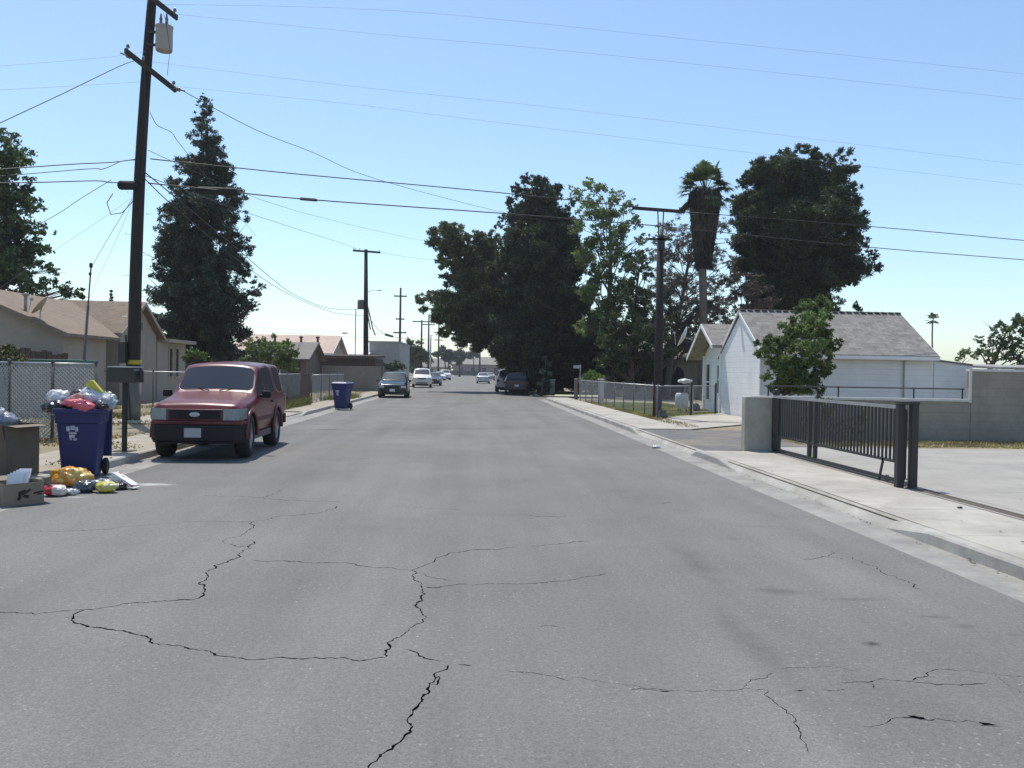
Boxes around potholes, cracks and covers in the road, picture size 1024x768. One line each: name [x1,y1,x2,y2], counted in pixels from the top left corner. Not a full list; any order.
crack [0,506,602,768]
crack [506,666,1024,751]
